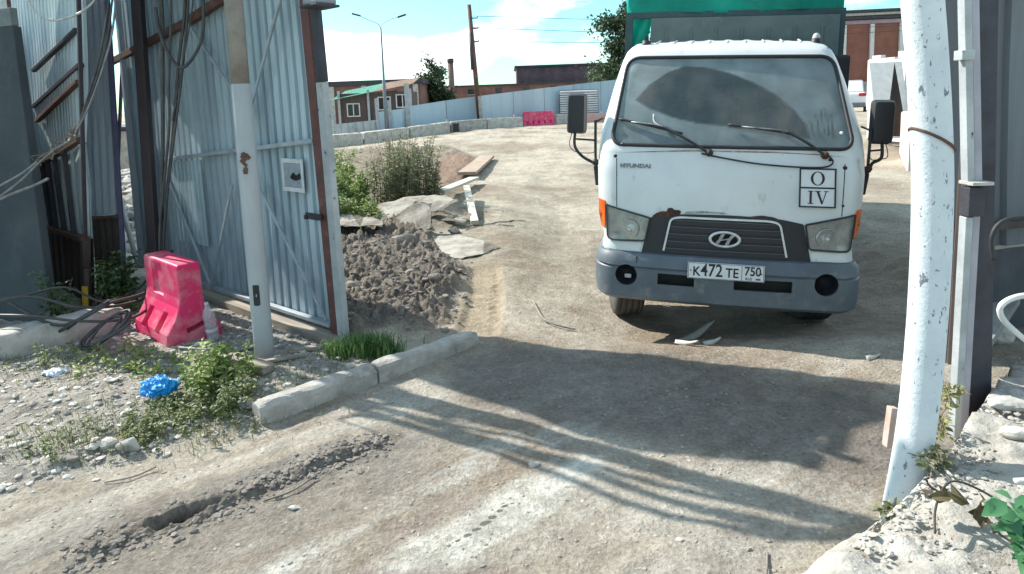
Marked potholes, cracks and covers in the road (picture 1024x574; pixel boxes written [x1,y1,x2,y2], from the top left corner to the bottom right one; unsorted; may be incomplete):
pothole [120,486,243,539]
